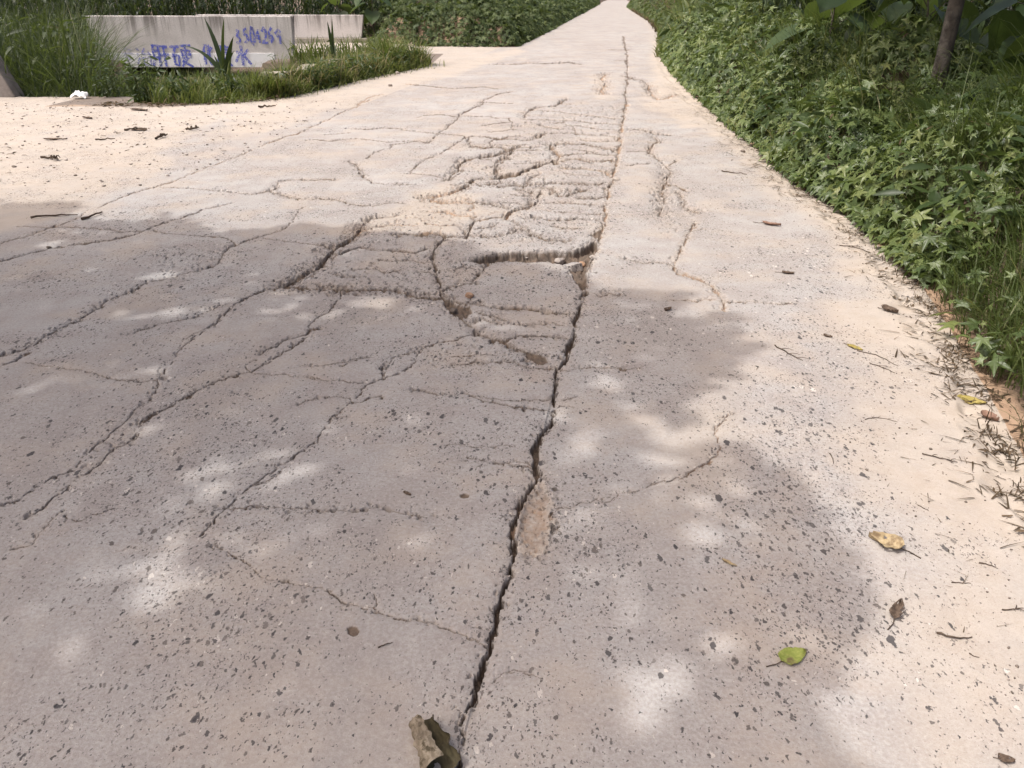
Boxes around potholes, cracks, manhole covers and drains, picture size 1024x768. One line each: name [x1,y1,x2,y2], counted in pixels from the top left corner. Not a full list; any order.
crack [0,36,792,768]
pothole [468,239,600,296]
pothole [441,299,473,320]
pothole [524,351,549,366]
